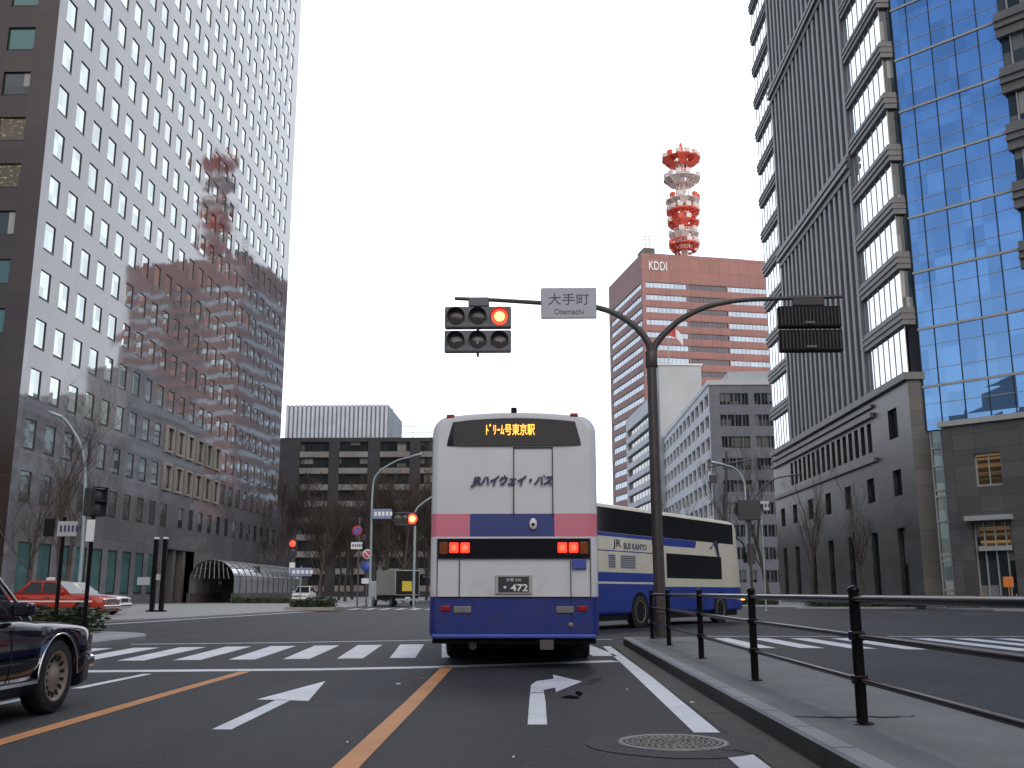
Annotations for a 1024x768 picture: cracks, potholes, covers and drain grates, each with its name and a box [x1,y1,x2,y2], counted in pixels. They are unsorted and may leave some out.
manhole cover [617,734,730,751]
